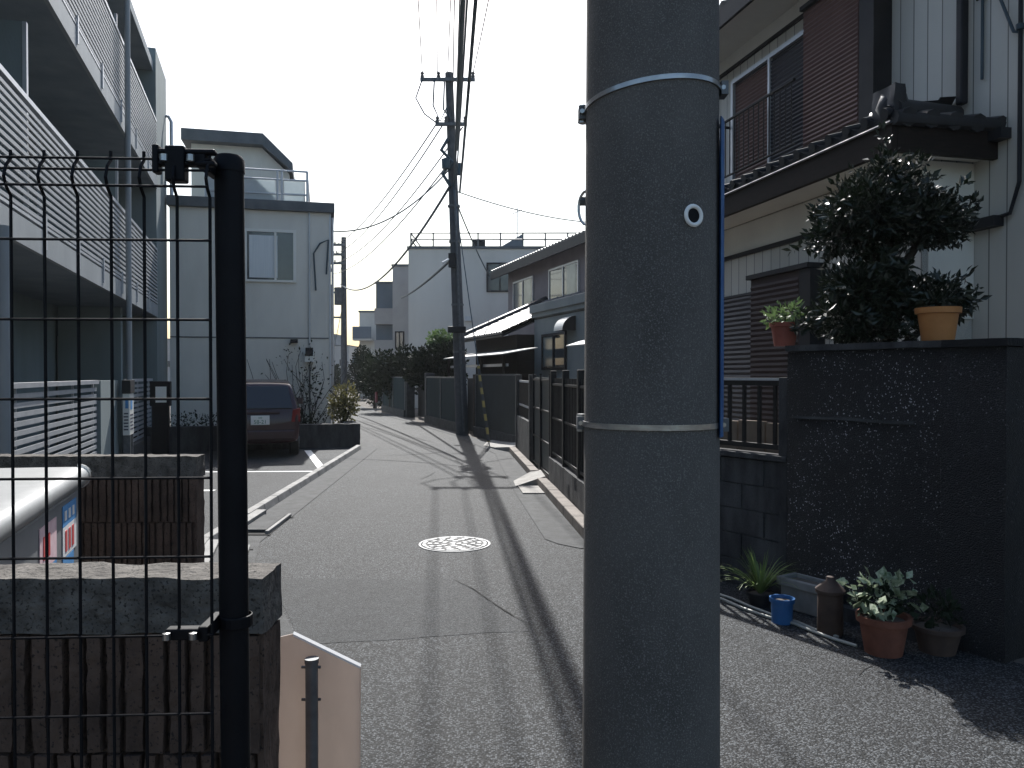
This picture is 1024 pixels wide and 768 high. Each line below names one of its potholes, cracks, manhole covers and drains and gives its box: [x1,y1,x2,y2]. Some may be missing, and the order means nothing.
crack [457,580,534,626]
manhole cover [419,536,491,552]
